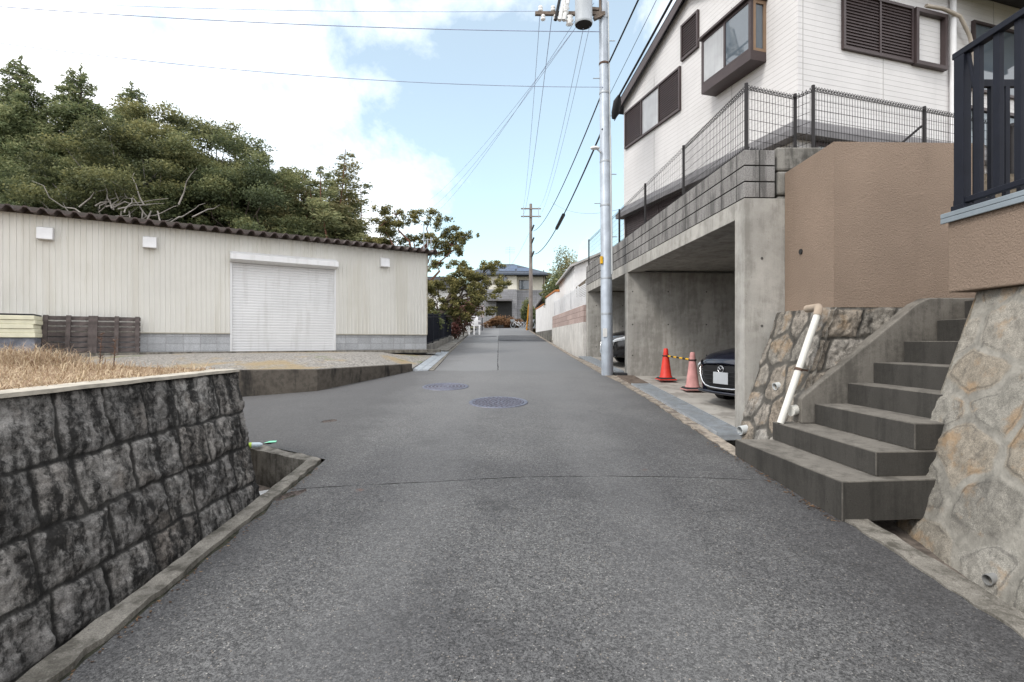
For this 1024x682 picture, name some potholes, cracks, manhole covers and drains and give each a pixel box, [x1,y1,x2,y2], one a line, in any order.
manhole cover [422,383,469,391]
manhole cover [469,396,528,408]
